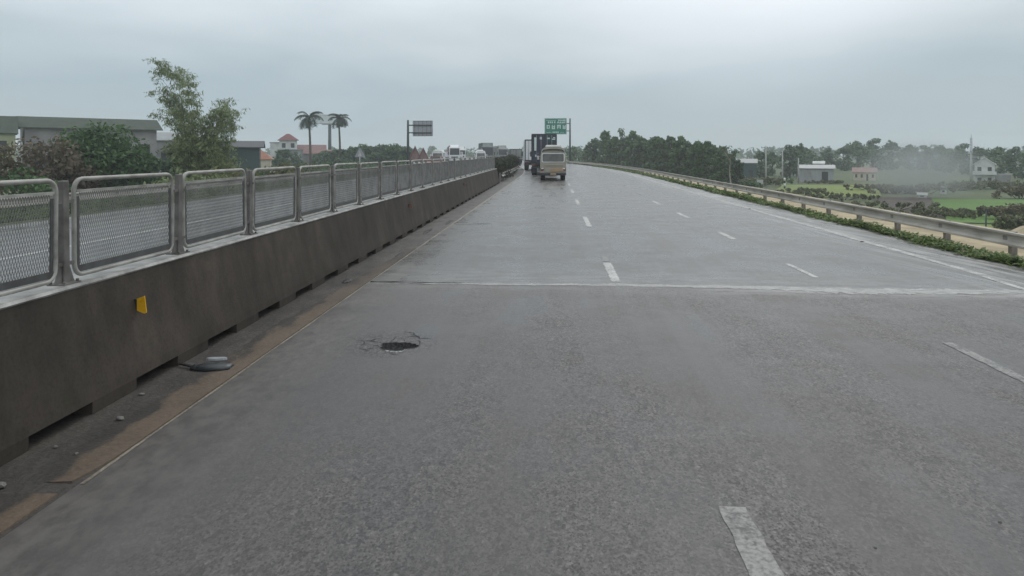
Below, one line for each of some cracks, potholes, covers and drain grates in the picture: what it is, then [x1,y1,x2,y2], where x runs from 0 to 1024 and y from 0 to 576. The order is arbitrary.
pothole [380,342,420,352]
